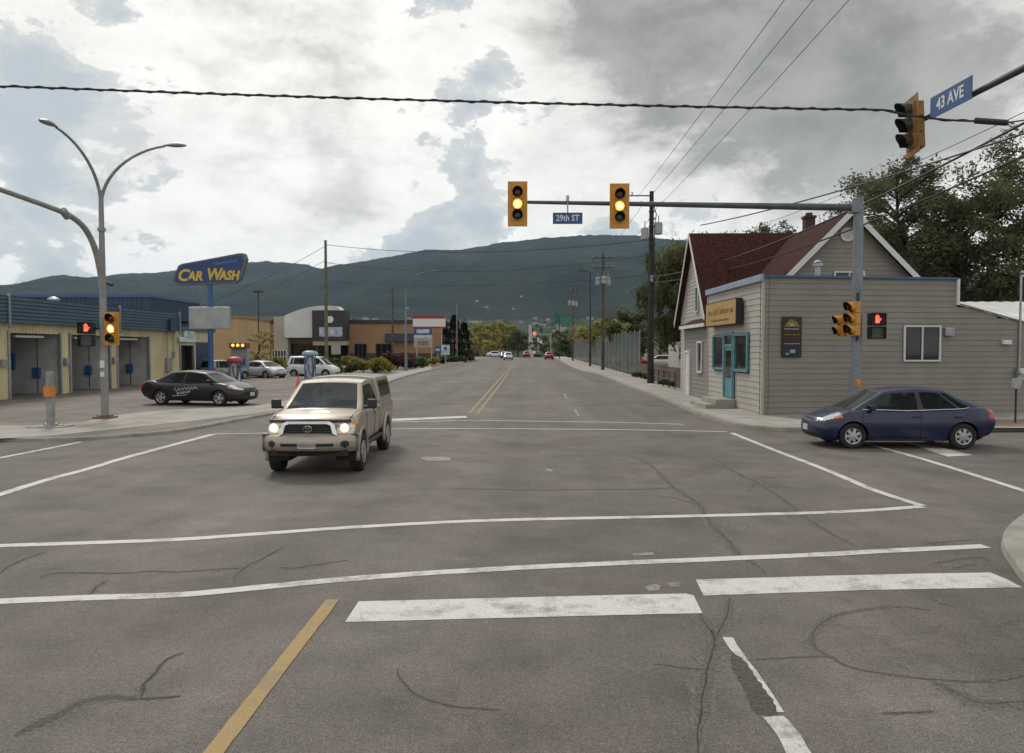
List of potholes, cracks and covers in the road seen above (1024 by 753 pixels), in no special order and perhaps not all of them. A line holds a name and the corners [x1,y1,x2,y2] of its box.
crack [750,593,1024,715]
crack [452,451,853,574]
crack [396,669,501,711]
